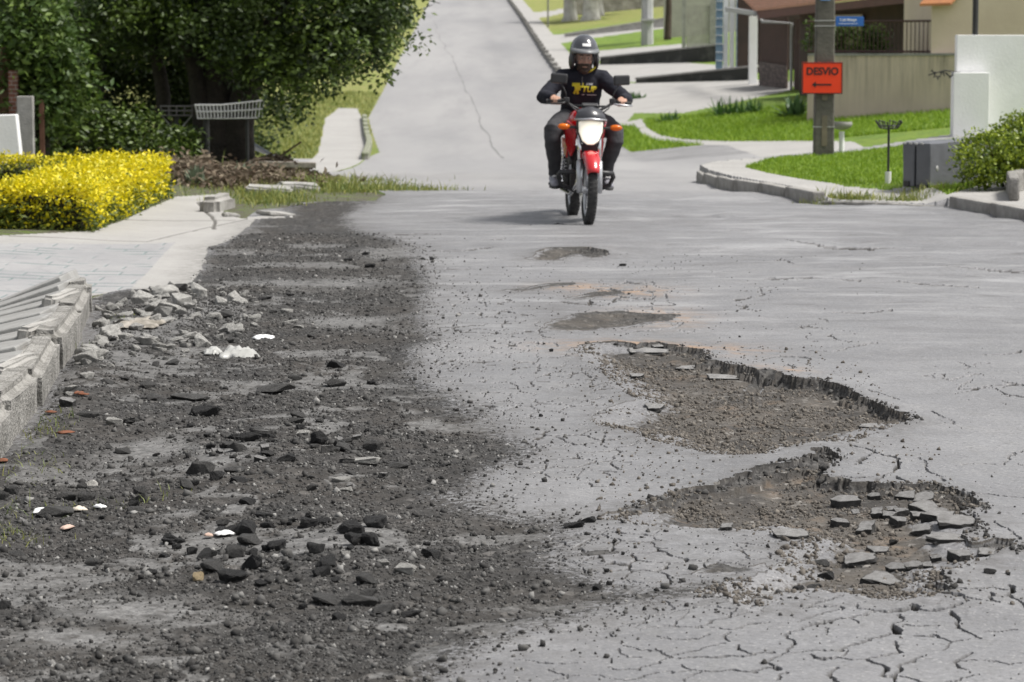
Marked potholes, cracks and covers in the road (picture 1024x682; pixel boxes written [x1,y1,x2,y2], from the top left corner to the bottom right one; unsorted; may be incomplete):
crack [425,280,695,501]
crack [830,443,1024,540]
pothole [524,247,610,261]
pothole [502,282,576,292]
crack [512,527,1024,682]
crack [930,411,956,425]
pothole [600,446,1016,614]
crack [922,350,1024,405]
pothole [569,341,909,455]
pothole [542,311,681,332]
